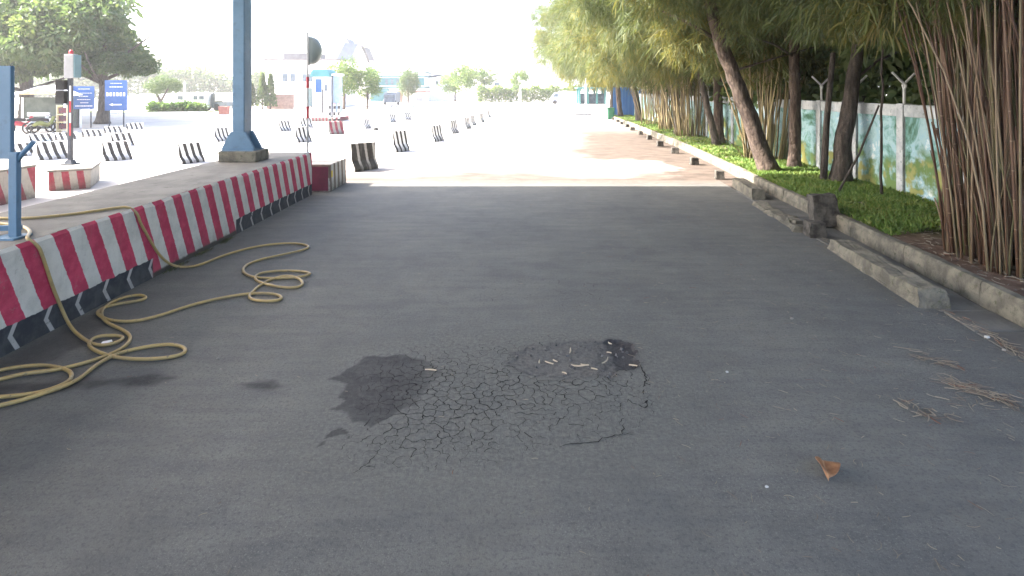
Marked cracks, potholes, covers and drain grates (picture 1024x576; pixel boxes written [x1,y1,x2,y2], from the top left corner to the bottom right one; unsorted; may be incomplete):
pothole [506,339,641,379]
crack [338,335,657,472]
